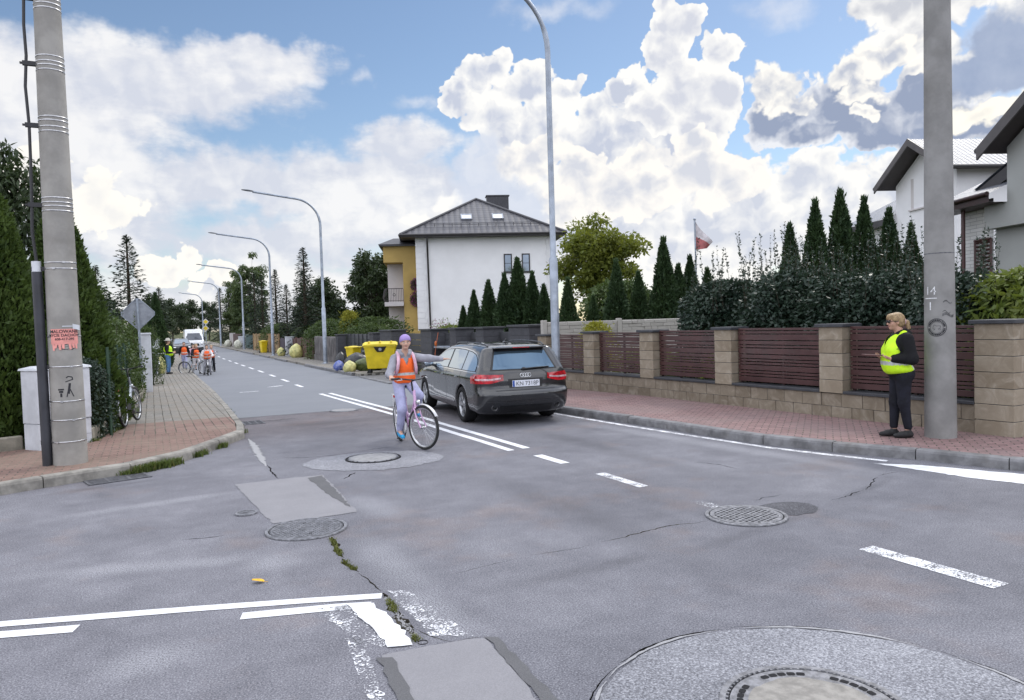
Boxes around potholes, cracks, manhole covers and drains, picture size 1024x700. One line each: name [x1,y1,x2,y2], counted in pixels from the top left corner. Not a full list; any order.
manhole cover [705,505,789,527]
drain grate [83,472,152,486]
manhole cover [345,453,401,463]
crack [456,521,702,574]
manhole cover [719,665,903,700]
manhole cover [265,517,348,541]
